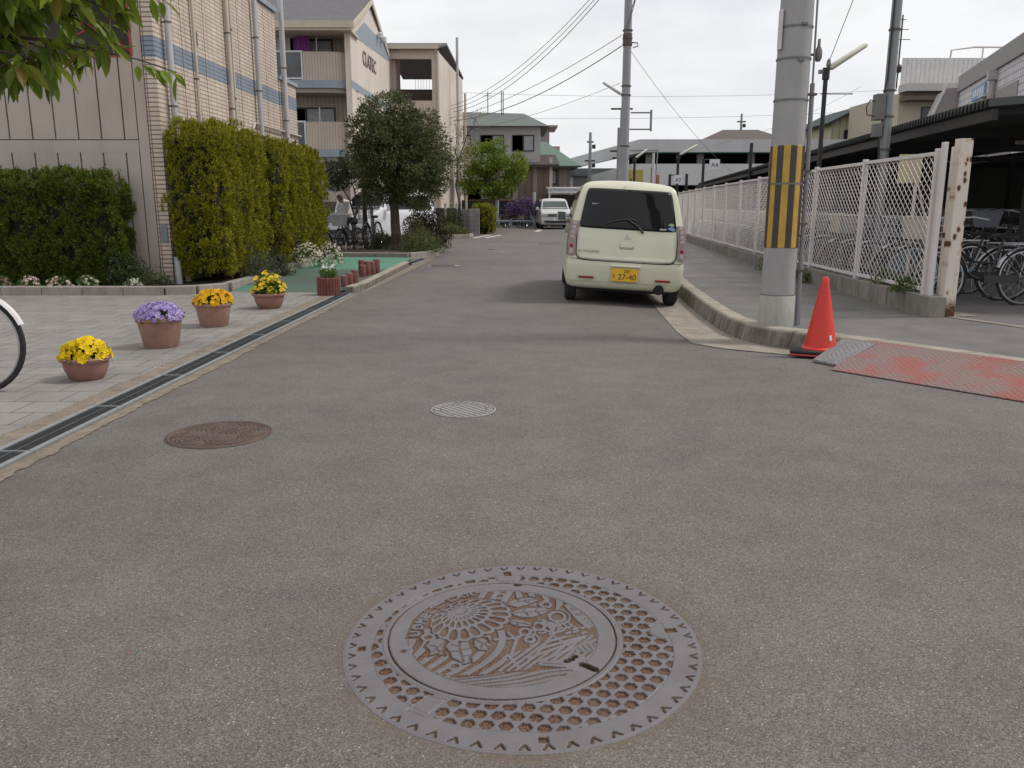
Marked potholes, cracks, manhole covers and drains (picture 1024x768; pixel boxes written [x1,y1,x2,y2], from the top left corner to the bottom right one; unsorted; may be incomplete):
manhole cover [164,421,273,449]
manhole cover [430,402,496,418]
manhole cover [342,566,703,755]
